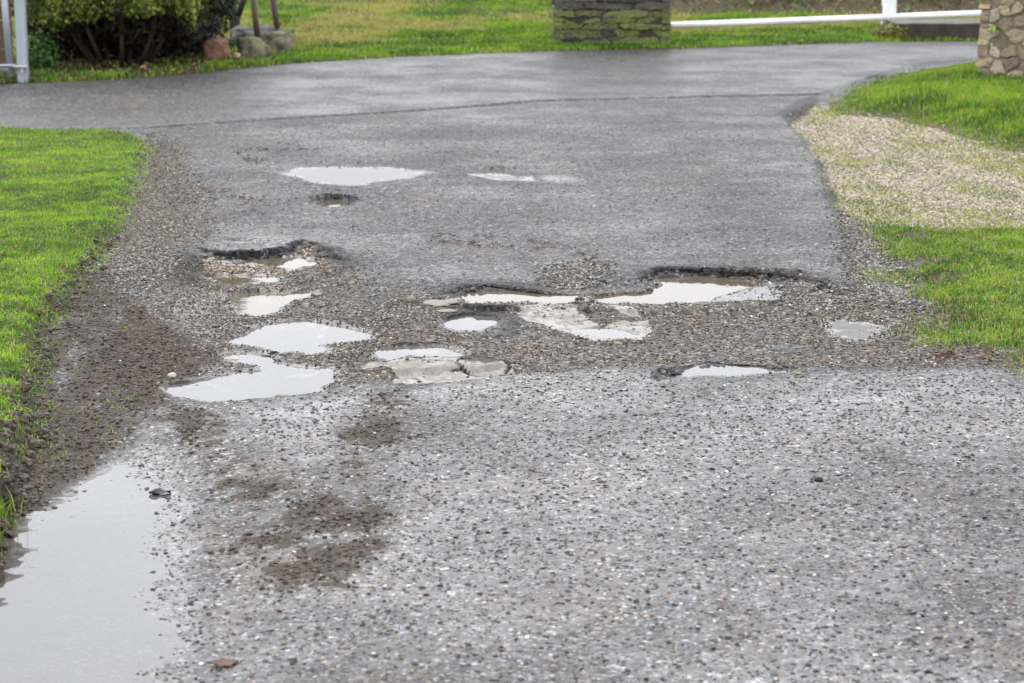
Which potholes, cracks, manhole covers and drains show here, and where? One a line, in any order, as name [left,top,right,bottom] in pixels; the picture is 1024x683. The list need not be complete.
pothole [450,284,594,314]
pothole [306,193,359,207]
pothole [509,303,657,346]
pothole [575,267,845,315]
pothole [211,284,326,322]
pothole [650,361,813,383]
pothole [147,317,381,403]
pothole [427,313,507,339]
pothole [351,342,524,384]
pothole [194,240,348,292]
